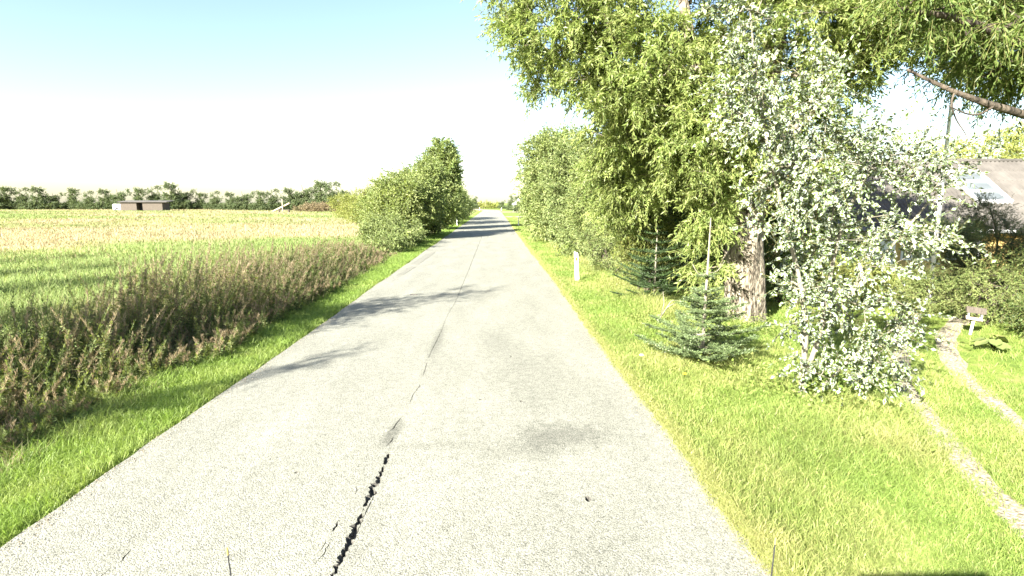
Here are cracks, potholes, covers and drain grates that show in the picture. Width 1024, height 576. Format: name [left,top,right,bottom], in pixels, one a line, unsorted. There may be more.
crack [319,454,390,576]
